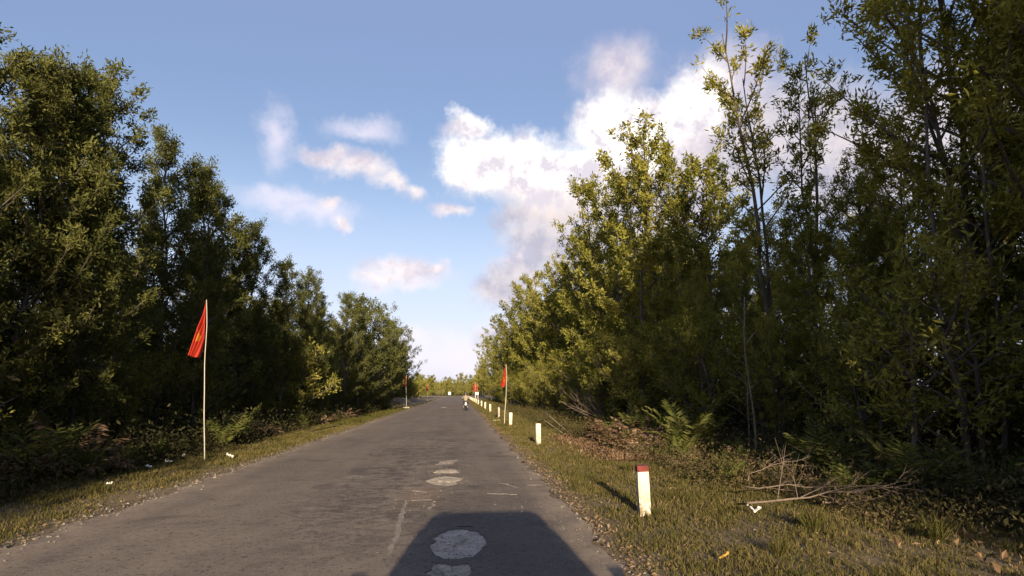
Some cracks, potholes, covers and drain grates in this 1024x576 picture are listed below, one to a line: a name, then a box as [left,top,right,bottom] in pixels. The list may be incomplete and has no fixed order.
crack [356,449,439,555]
